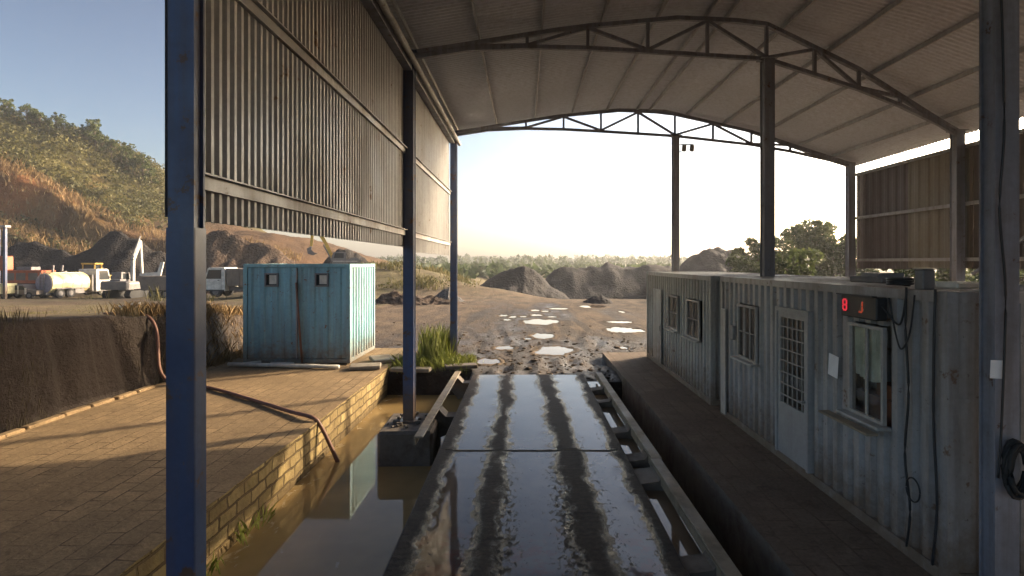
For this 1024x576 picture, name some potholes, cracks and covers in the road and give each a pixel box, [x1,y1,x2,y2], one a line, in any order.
pothole [517,318,565,326]
pothole [530,345,580,361]
pothole [475,357,505,366]
pothole [527,332,558,340]
pothole [601,326,647,334]
